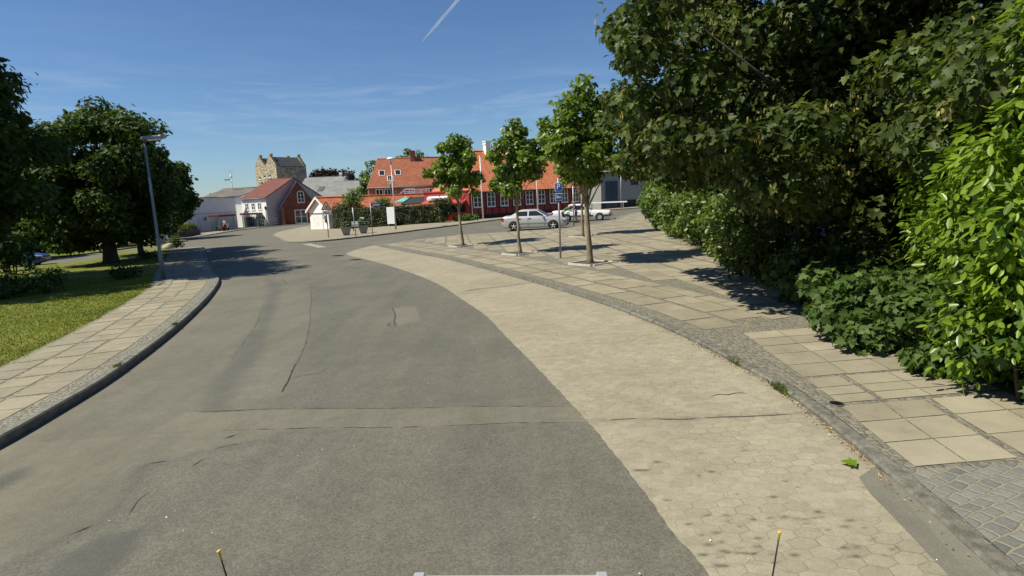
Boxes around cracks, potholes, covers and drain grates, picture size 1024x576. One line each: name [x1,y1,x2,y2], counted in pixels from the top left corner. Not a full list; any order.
crack [282,283,316,391]
